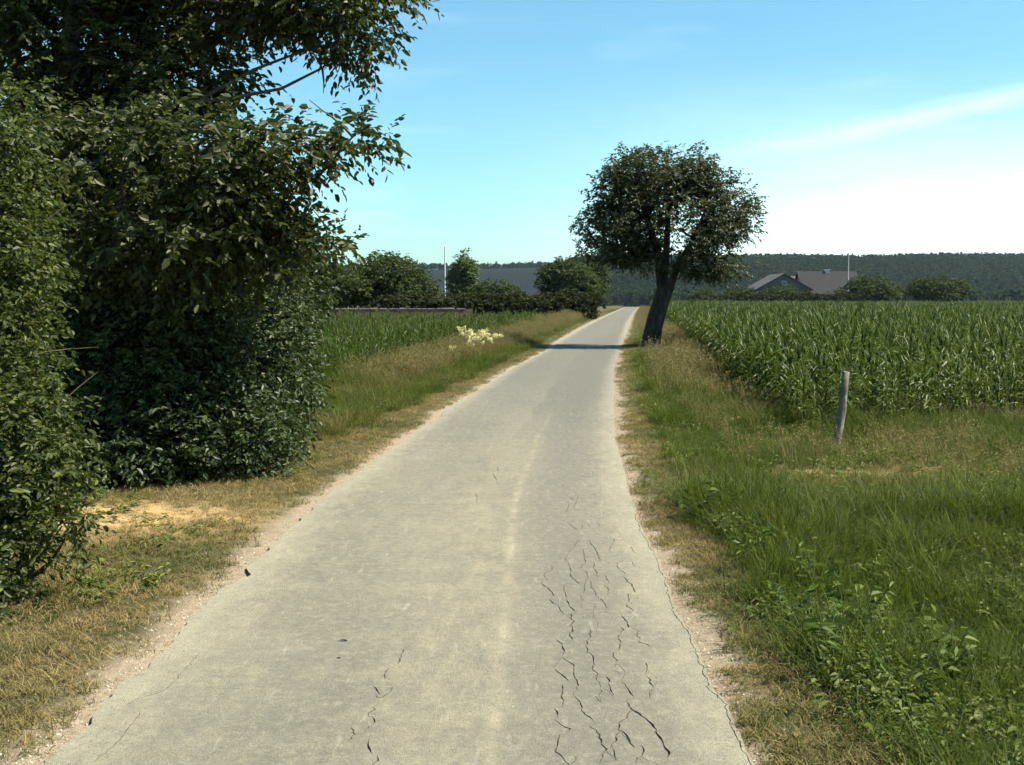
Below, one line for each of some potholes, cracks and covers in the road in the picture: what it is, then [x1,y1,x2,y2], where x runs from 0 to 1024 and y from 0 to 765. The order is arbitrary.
crack [93,656,196,763]
crack [347,648,405,765]
crack [541,472,671,765]
crack [634,514,749,761]
